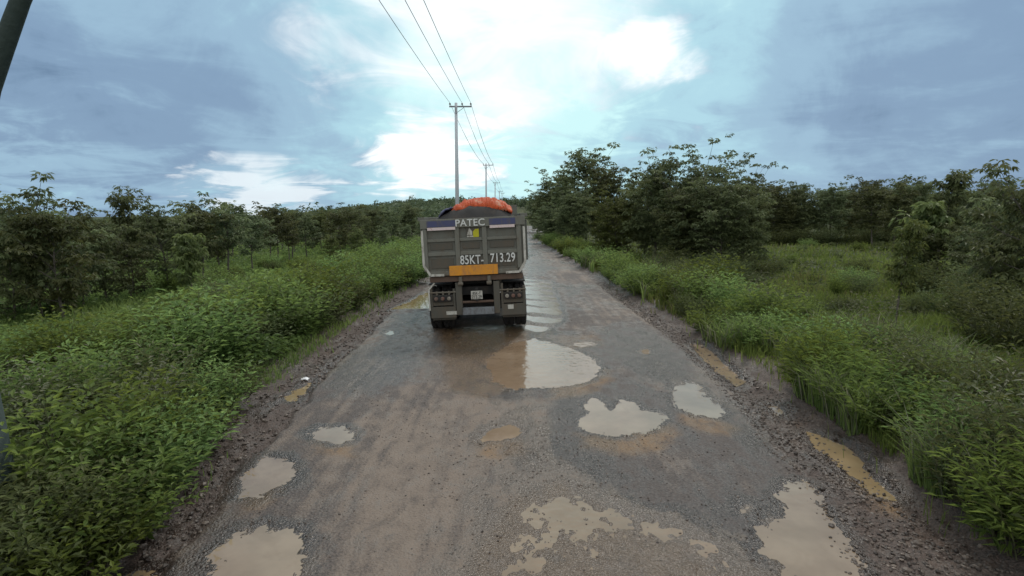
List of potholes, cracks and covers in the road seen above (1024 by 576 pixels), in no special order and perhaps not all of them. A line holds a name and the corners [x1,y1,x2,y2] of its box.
pothole [472,421,528,444]
pothole [482,337,604,390]
pothole [667,379,733,419]
pothole [392,292,429,309]
pothole [307,424,362,446]
pothole [201,518,320,576]
pothole [273,378,318,404]
pothole [747,478,876,576]
pothole [578,395,672,438]
pothole [801,430,904,502]
pothole [232,453,302,500]
pothole [688,340,749,388]
